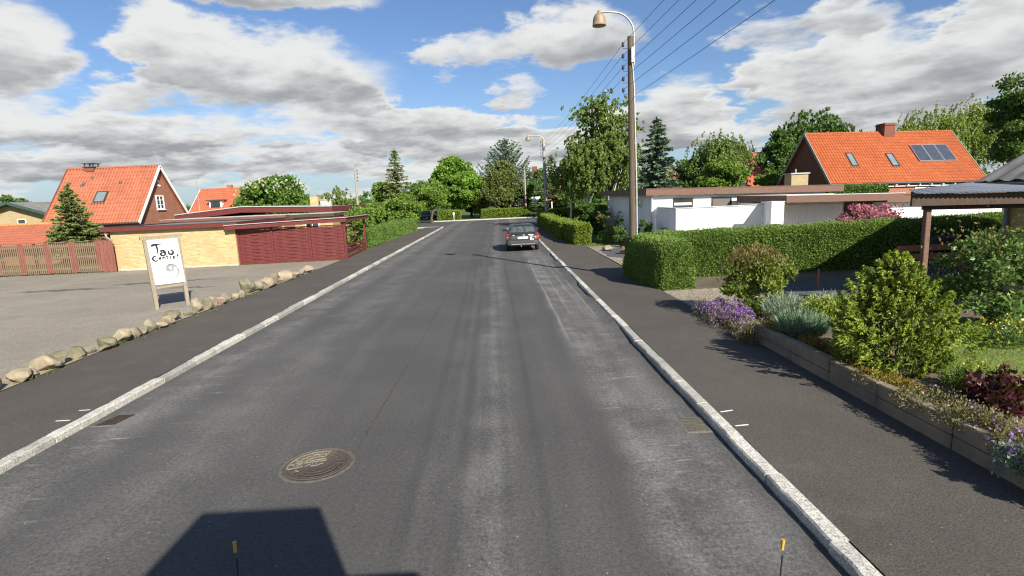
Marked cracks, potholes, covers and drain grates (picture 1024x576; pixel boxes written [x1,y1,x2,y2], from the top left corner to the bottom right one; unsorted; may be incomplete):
manhole cover [277,448,355,483]
